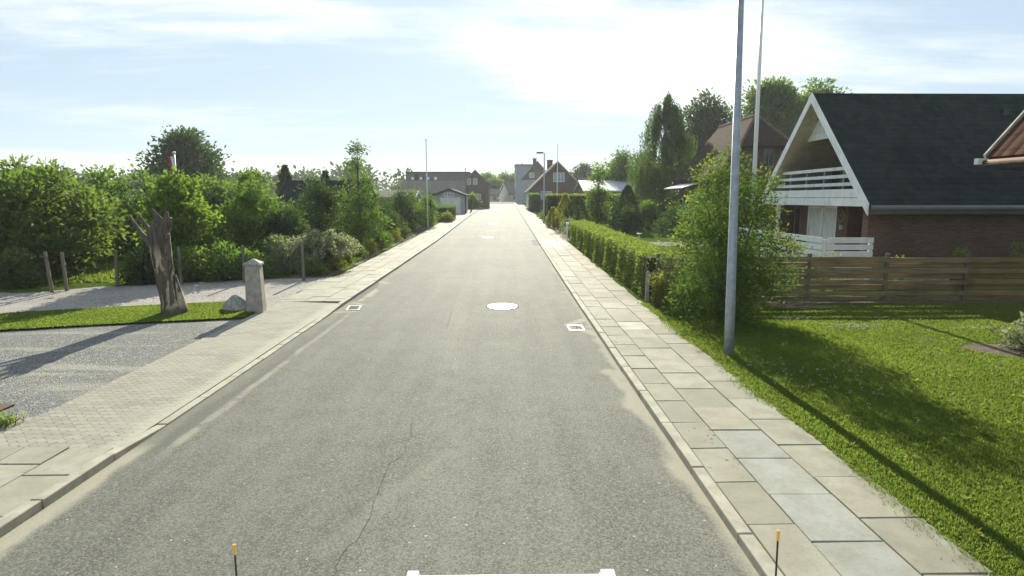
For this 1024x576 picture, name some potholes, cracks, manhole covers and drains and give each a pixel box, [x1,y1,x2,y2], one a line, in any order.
crack [334,419,455,576]
